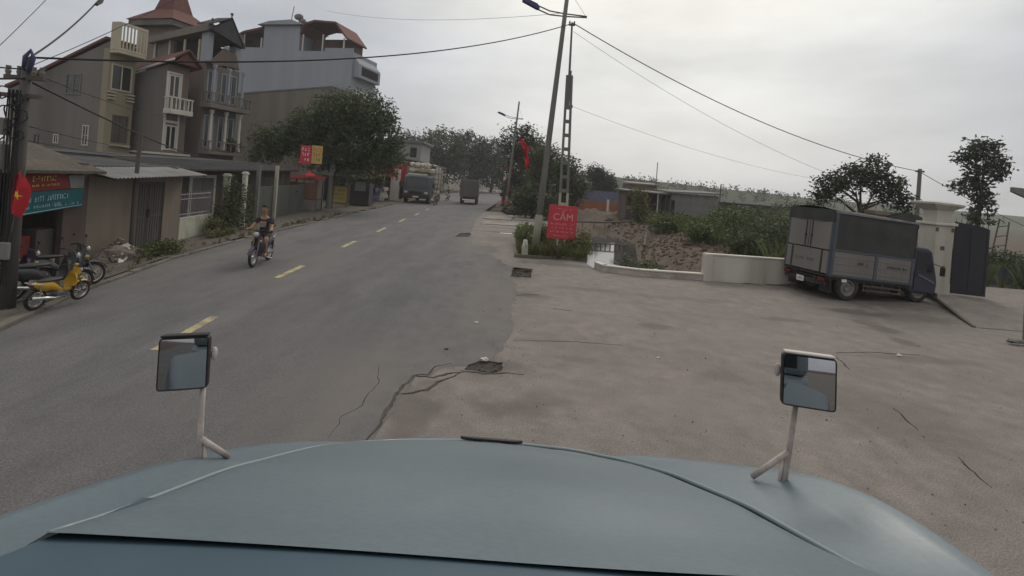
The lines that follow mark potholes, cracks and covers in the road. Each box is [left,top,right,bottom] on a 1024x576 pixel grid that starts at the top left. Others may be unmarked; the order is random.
crack [836,356,992,488]
crack [329,364,524,440]
pothole [464,361,503,373]
